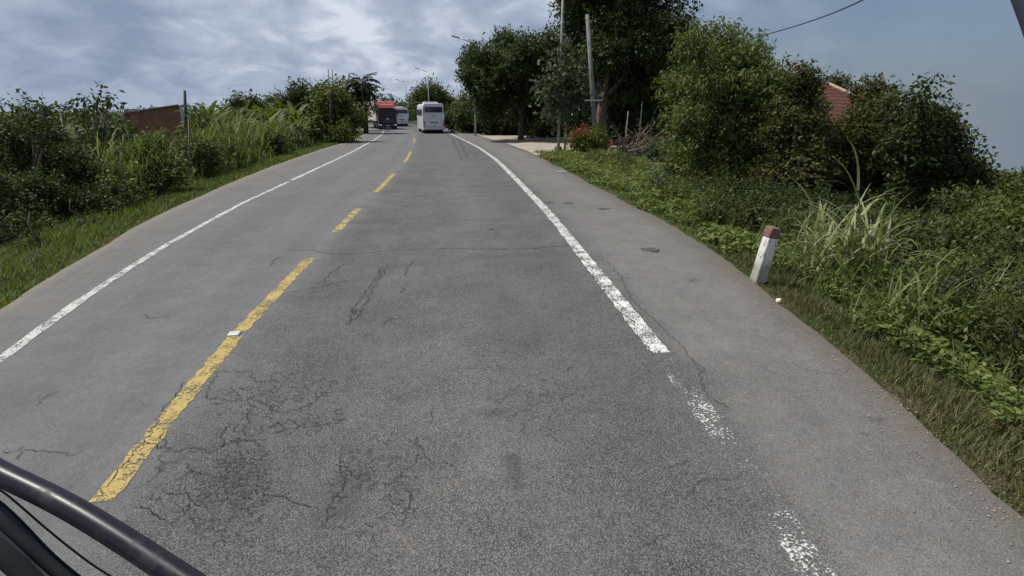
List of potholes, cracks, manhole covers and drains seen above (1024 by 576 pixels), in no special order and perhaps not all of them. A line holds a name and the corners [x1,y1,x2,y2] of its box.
crack [317,432,453,541]
crack [3,446,81,459]
crack [99,370,344,546]
crack [299,264,388,324]
